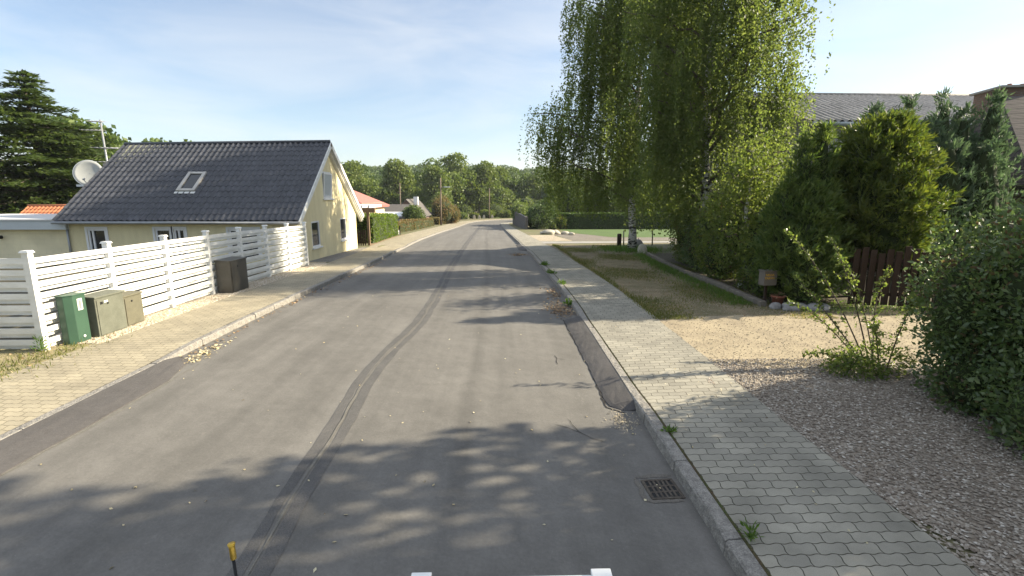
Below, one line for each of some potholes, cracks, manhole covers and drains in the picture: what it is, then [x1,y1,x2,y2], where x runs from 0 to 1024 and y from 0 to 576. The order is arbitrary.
drain grate [634,474,686,503]
